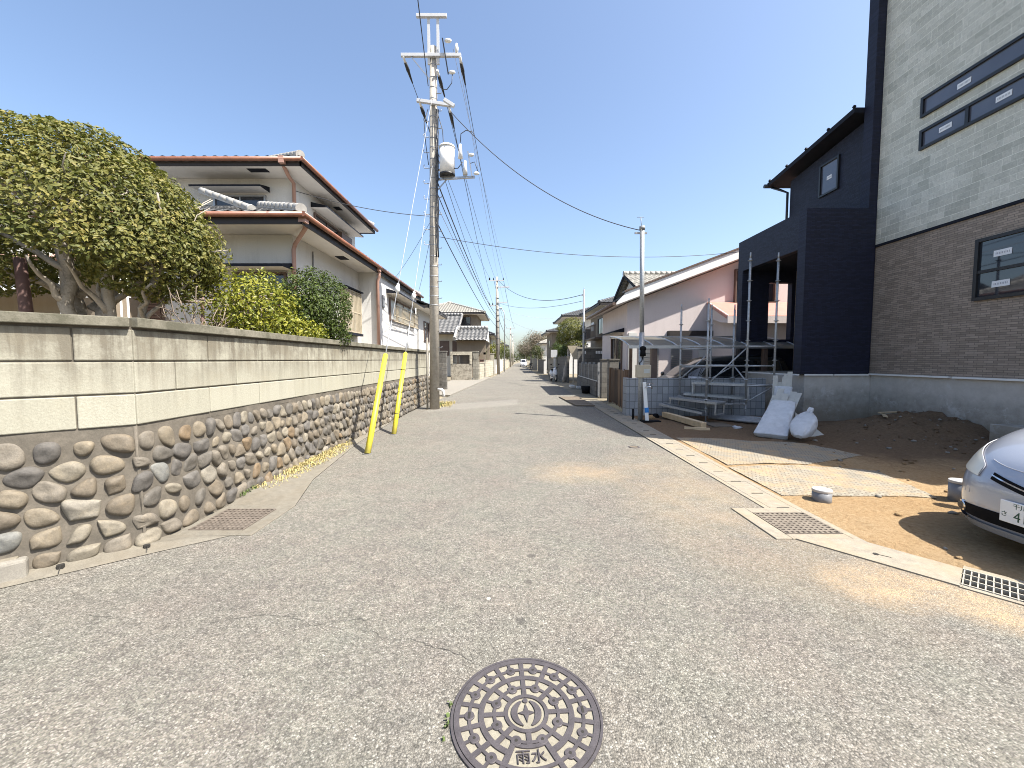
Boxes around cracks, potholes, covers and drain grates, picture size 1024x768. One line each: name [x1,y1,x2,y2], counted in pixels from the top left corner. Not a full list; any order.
drain grate [731,508,860,540]
crack [212,614,387,643]
drain grate [171,505,295,549]
drain grate [960,568,1024,602]
manhole cover [450,658,603,768]
